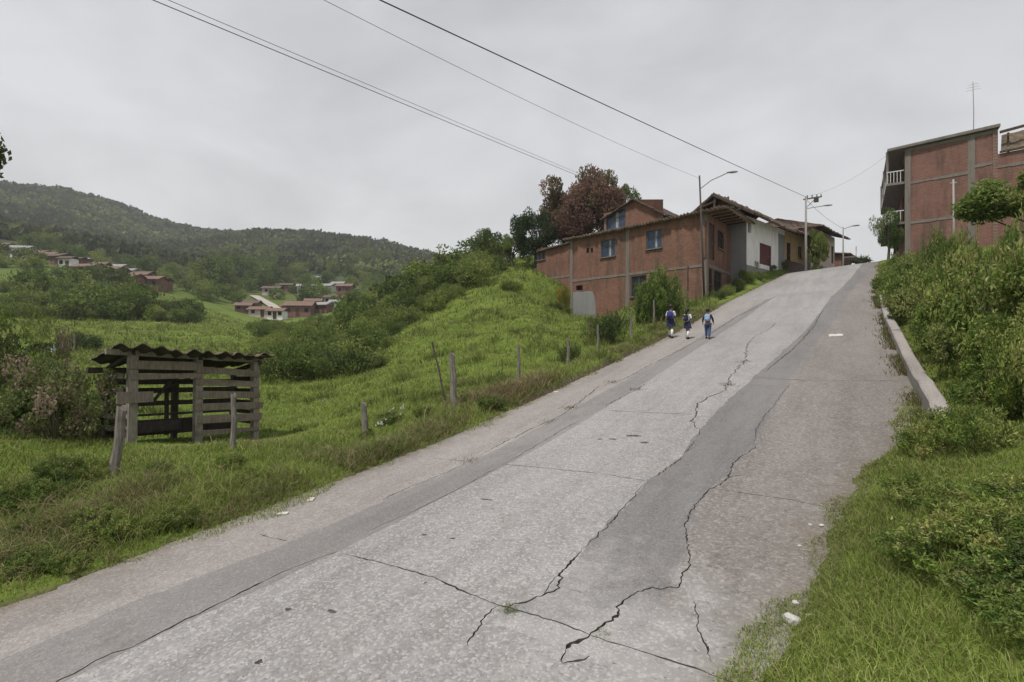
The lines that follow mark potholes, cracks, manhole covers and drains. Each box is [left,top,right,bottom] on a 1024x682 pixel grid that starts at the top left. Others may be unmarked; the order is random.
crack [467,325,791,664]
crack [374,296,776,529]
